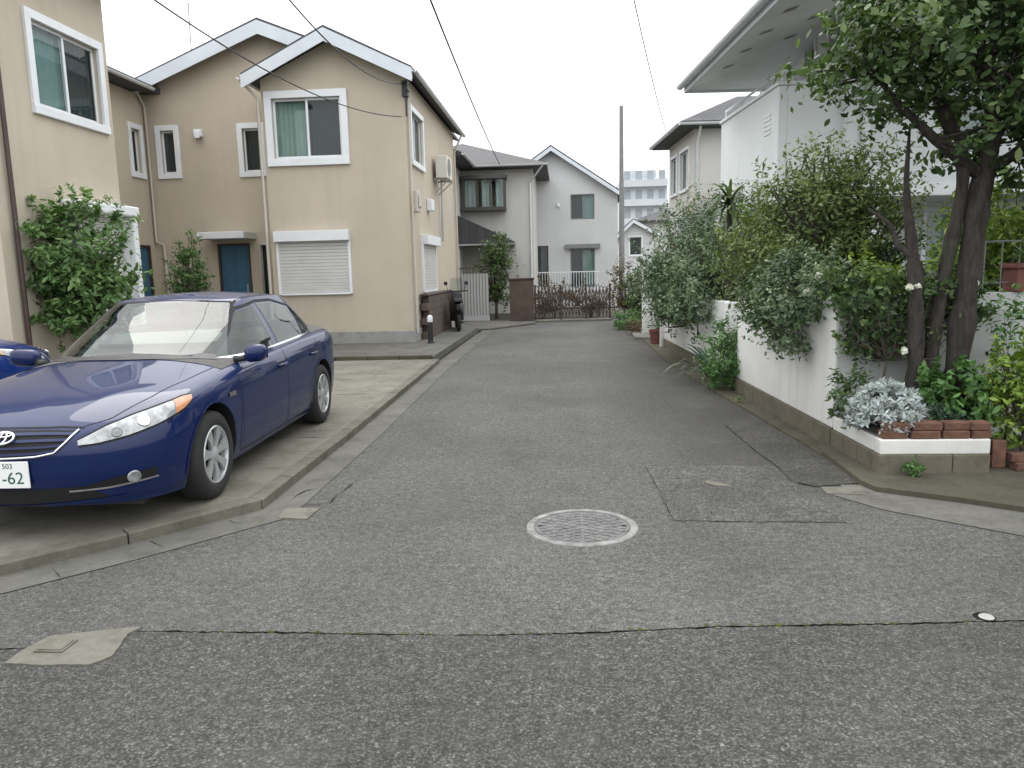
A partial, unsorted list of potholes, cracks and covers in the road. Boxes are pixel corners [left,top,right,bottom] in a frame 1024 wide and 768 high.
manhole cover [526,509,638,547]
utility cover [33,639,78,653]
